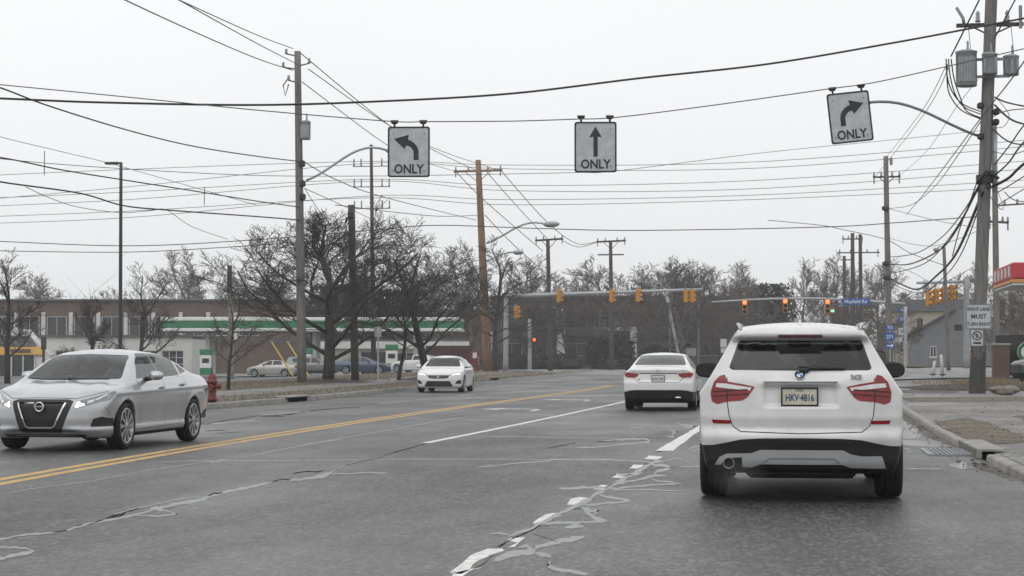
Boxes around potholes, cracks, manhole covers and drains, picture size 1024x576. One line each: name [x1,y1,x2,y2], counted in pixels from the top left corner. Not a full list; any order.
crack [209,407,353,433]
drain grate [920,439,1005,458]
crack [490,410,700,451]
